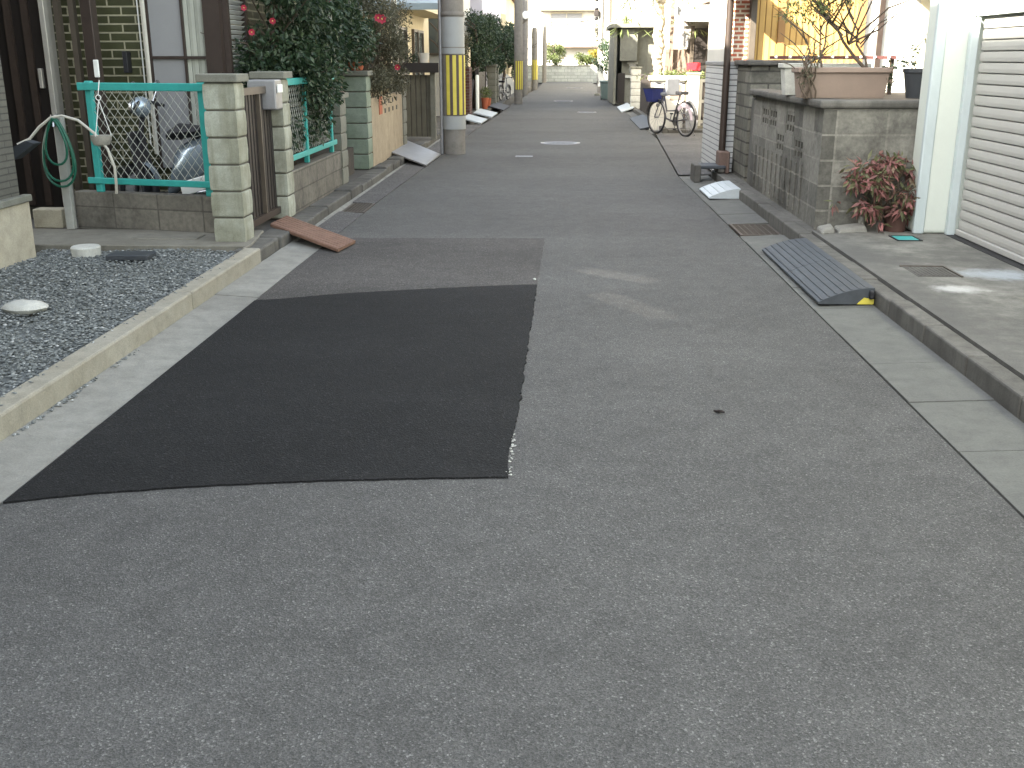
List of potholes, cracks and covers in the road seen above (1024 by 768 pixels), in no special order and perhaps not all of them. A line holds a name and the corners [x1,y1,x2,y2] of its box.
drain grate [341,203,375,213]
drain grate [729,224,782,237]
